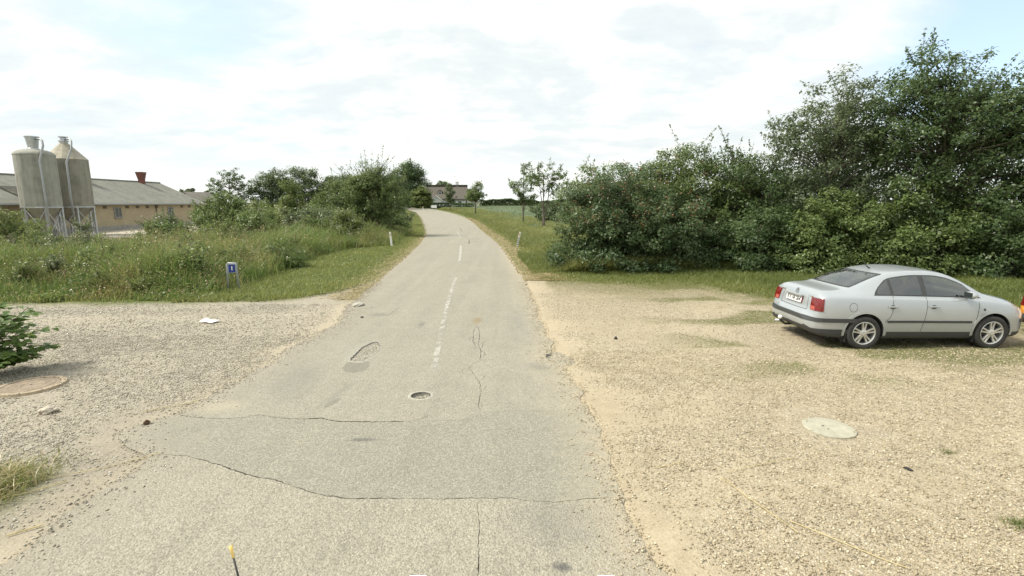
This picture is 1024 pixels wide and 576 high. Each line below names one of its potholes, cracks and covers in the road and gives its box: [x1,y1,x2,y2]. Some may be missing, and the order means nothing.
manhole cover [801,417,857,439]
crack [464,326,486,409]
manhole cover [0,375,68,398]
crack [173,410,562,422]
pothole [349,341,381,363]
crack [174,455,611,576]
